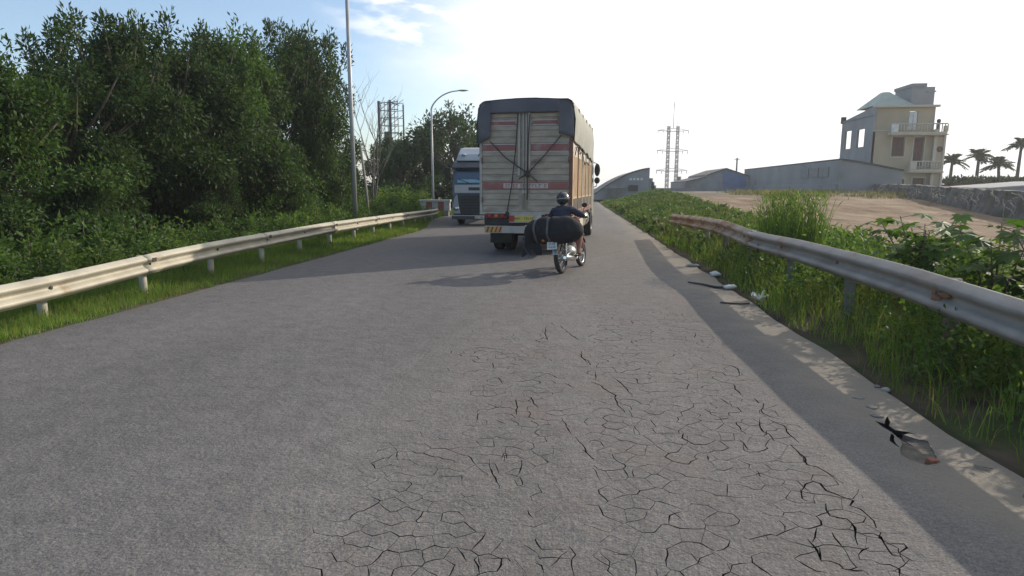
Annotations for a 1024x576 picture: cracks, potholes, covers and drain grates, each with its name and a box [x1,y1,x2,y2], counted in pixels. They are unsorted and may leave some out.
pothole [878,418,937,465]
crack [273,299,913,576]
